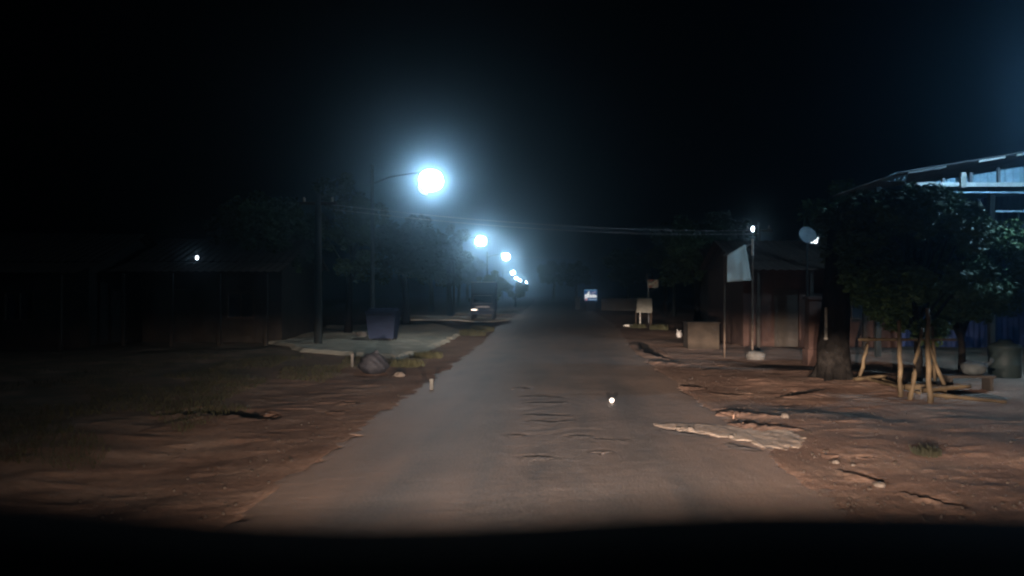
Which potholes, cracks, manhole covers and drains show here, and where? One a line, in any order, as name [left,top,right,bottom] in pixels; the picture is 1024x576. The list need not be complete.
pothole [627,342,674,360]
pothole [518,453,558,461]
crack [660,384,839,451]
crack [821,452,963,505]
